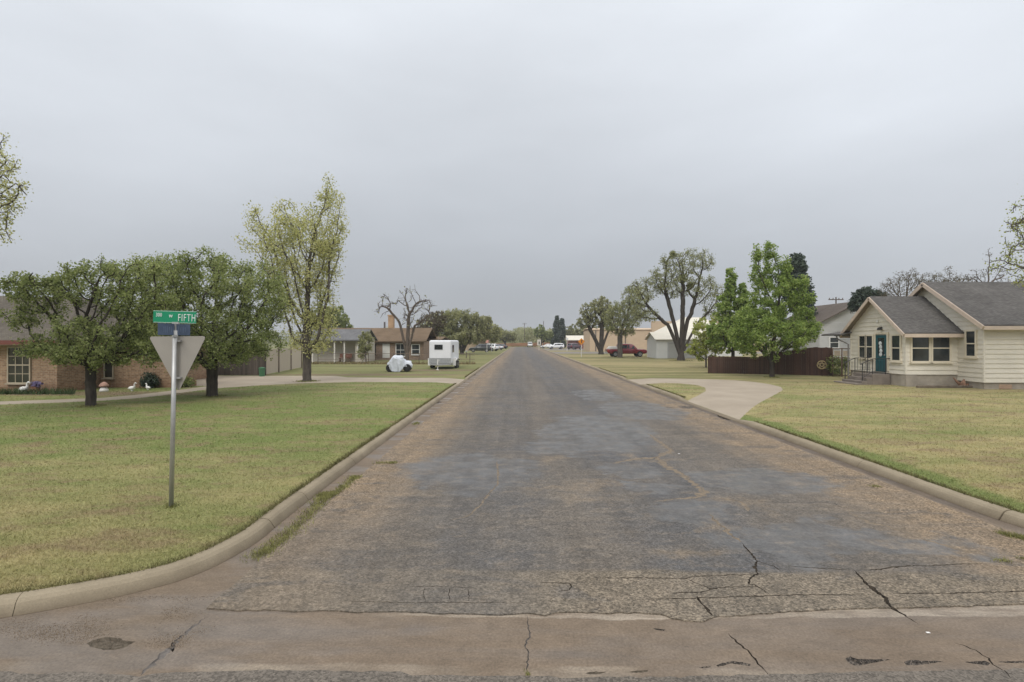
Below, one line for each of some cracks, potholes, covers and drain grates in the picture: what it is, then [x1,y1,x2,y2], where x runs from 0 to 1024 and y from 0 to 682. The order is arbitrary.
crack [588,434,1023,623]
crack [729,635,768,674]
pothole [87,637,136,650]
pothole [845,657,890,666]
crack [452,462,499,520]
